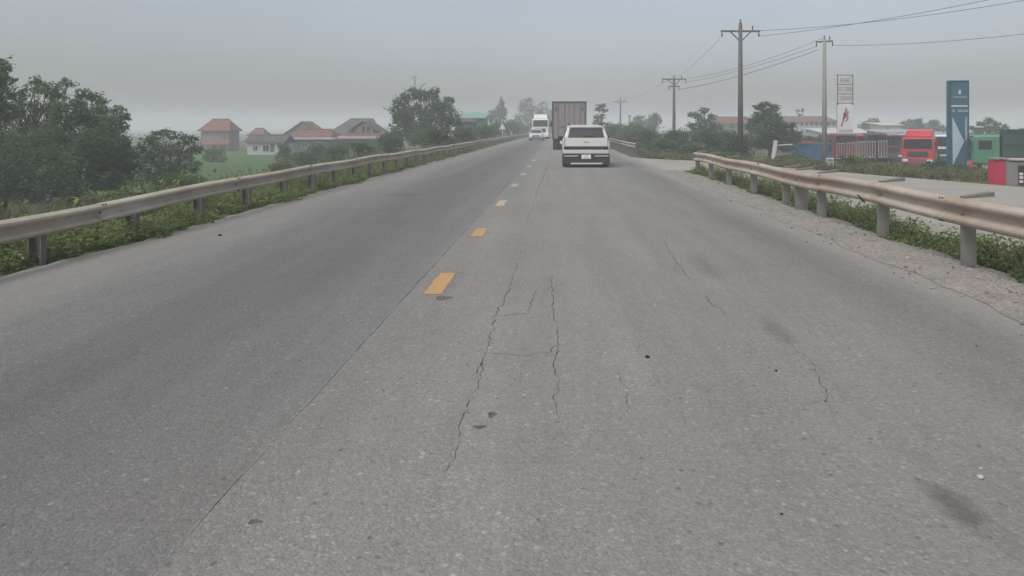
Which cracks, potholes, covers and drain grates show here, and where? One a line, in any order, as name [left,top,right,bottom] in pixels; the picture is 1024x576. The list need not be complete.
crack [445,262,575,473]
